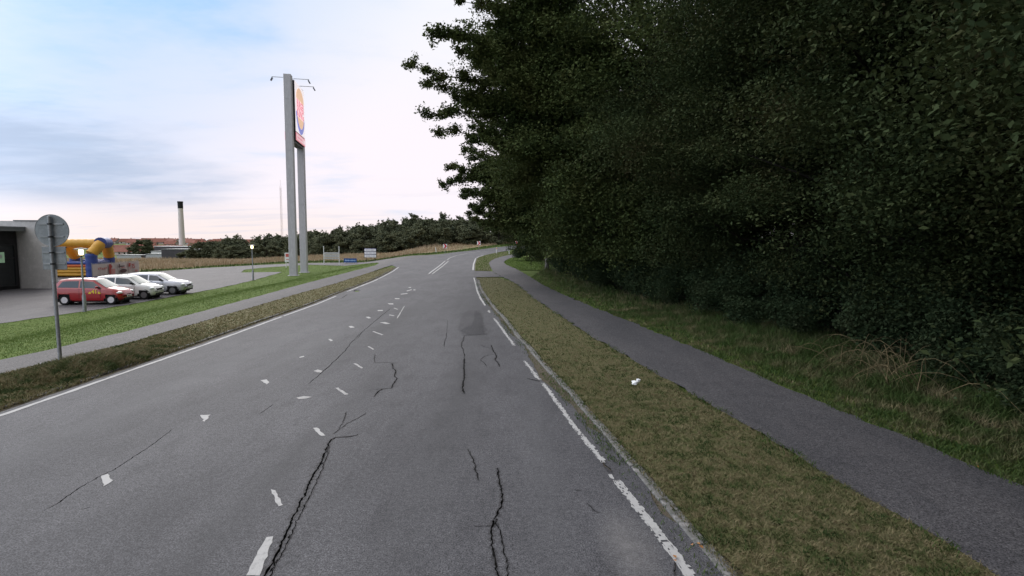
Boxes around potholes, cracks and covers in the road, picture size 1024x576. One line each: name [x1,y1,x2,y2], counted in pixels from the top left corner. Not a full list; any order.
crack [262,355,399,576]
crack [467,449,510,576]
crack [444,321,501,394]
crack [43,430,171,511]
